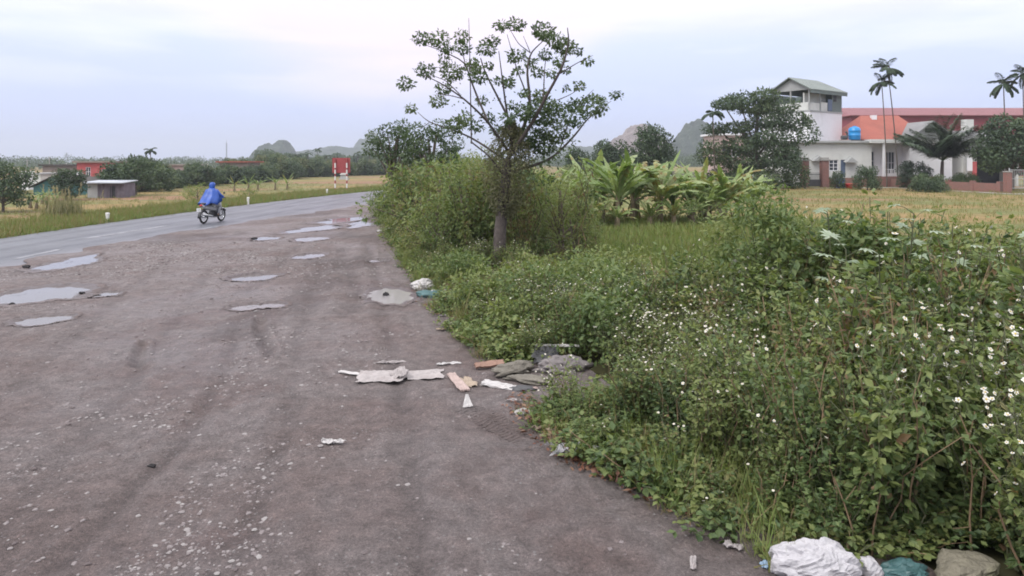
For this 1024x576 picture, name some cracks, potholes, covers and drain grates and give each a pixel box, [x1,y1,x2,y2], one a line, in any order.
pothole [223,300,293,312]
pothole [18,252,109,274]
pothole [218,271,291,282]
pothole [80,290,128,298]
pothole [334,220,383,229]
pothole [273,223,352,235]
pothole [305,216,372,225]
pothole [358,285,424,306]
pothole [288,252,332,260]
pothole [1,312,83,327]
pothole [0,282,108,307]
